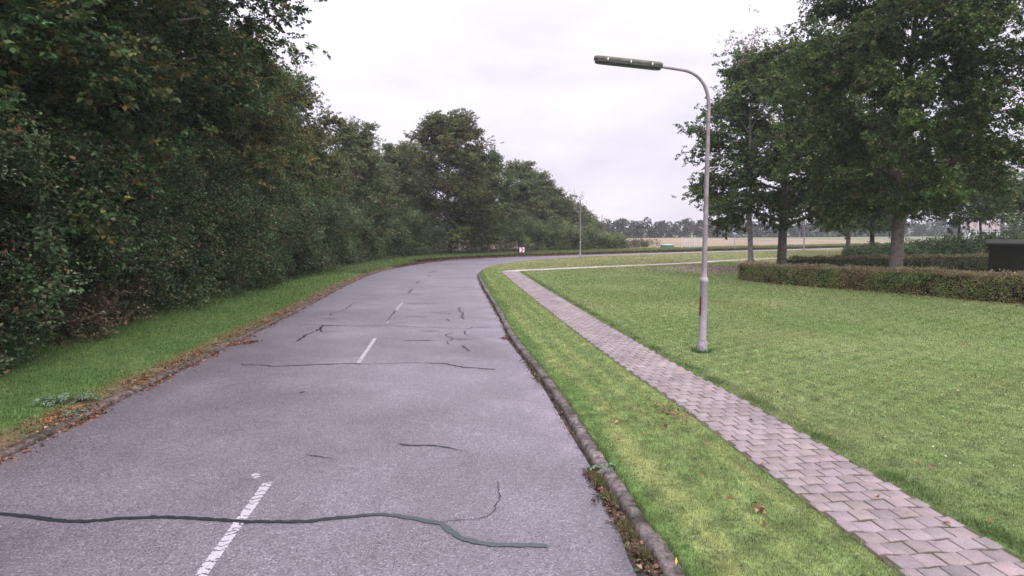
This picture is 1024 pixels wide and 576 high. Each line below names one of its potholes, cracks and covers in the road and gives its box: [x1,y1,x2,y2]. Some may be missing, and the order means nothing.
crack [296,301,479,351]
